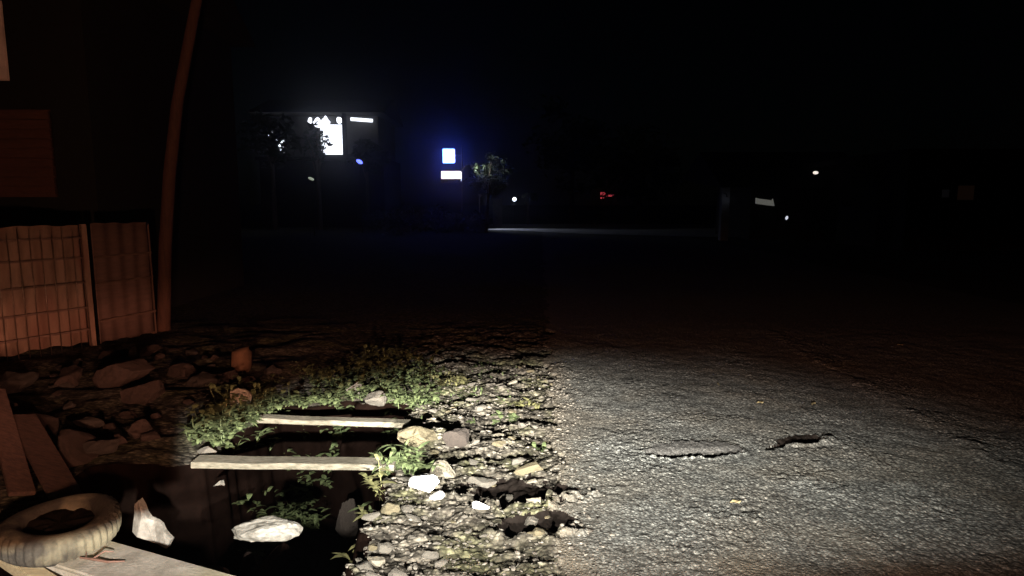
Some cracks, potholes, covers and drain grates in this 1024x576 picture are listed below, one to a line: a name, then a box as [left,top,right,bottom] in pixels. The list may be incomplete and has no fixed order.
pothole [765,434,825,450]
pothole [645,440,746,459]
